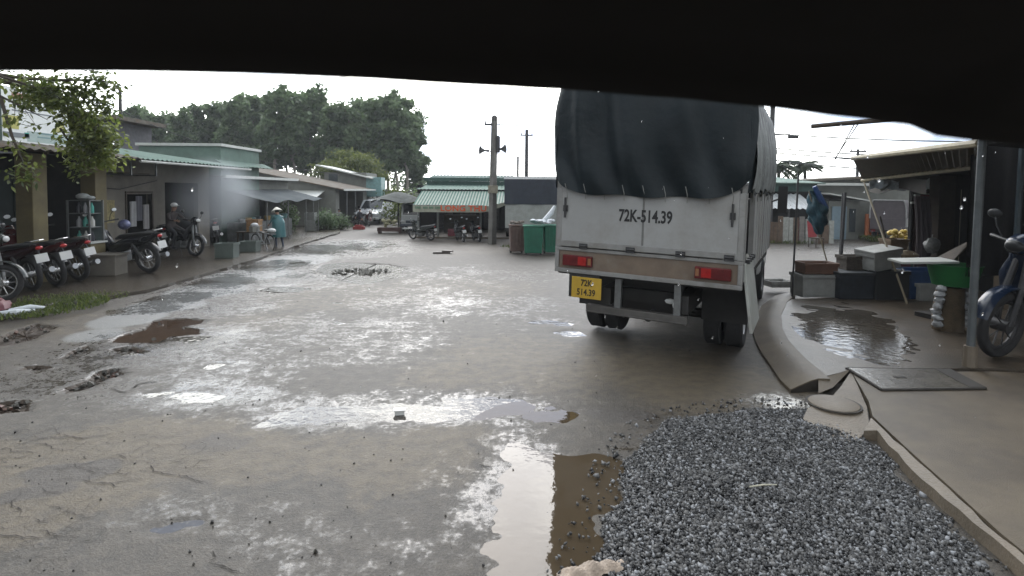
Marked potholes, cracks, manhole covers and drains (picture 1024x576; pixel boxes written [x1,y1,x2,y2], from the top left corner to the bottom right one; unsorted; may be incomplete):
pothole [51,367,133,398]
pothole [0,396,44,417]
pothole [311,262,411,286]
pothole [101,317,212,345]
crack [1,427,214,486]
pothole [100,345,150,356]
pothole [0,323,67,348]
